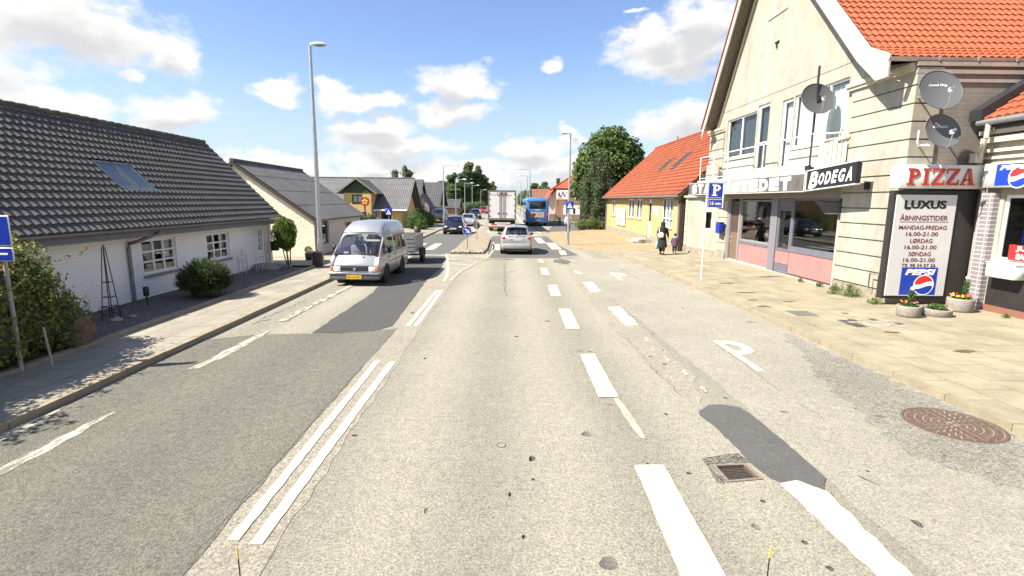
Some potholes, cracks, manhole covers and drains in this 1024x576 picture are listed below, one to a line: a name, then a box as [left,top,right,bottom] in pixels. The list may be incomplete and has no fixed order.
manhole cover [900,407,1011,444]
drain grate [711,463,764,483]
